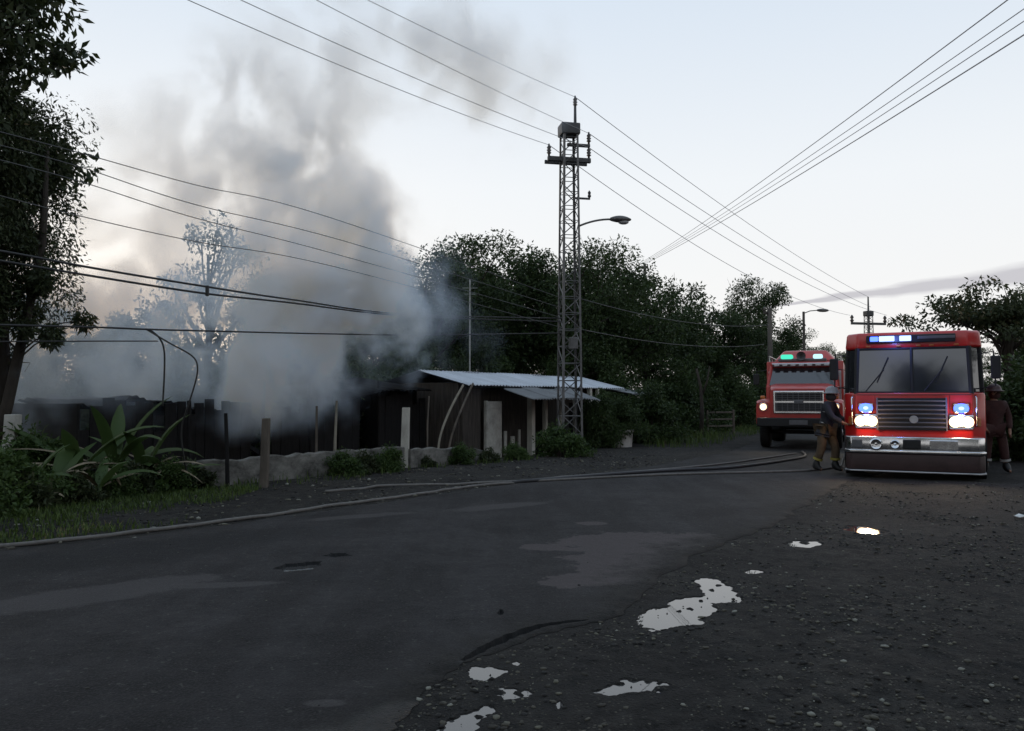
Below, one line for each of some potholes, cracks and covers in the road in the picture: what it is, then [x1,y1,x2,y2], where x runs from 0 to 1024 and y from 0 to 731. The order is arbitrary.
crack [457,619,590,663]
pothole [270,561,322,572]
